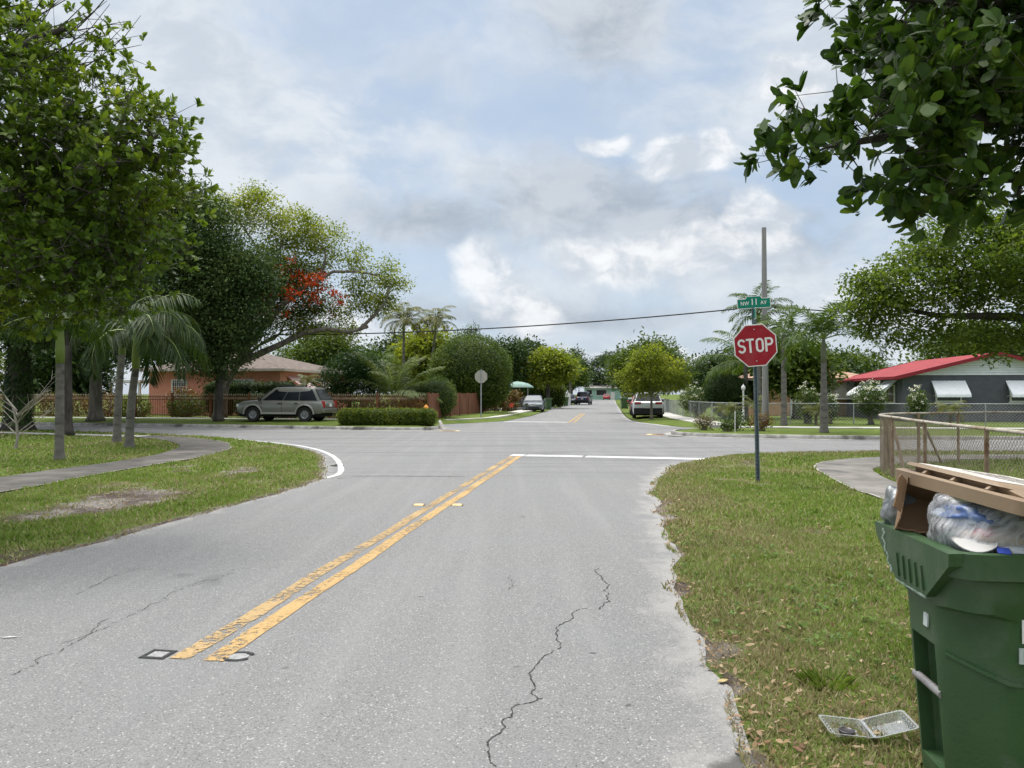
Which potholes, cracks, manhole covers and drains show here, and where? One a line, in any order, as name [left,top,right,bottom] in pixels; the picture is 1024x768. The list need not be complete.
crack [486,568,610,766]
